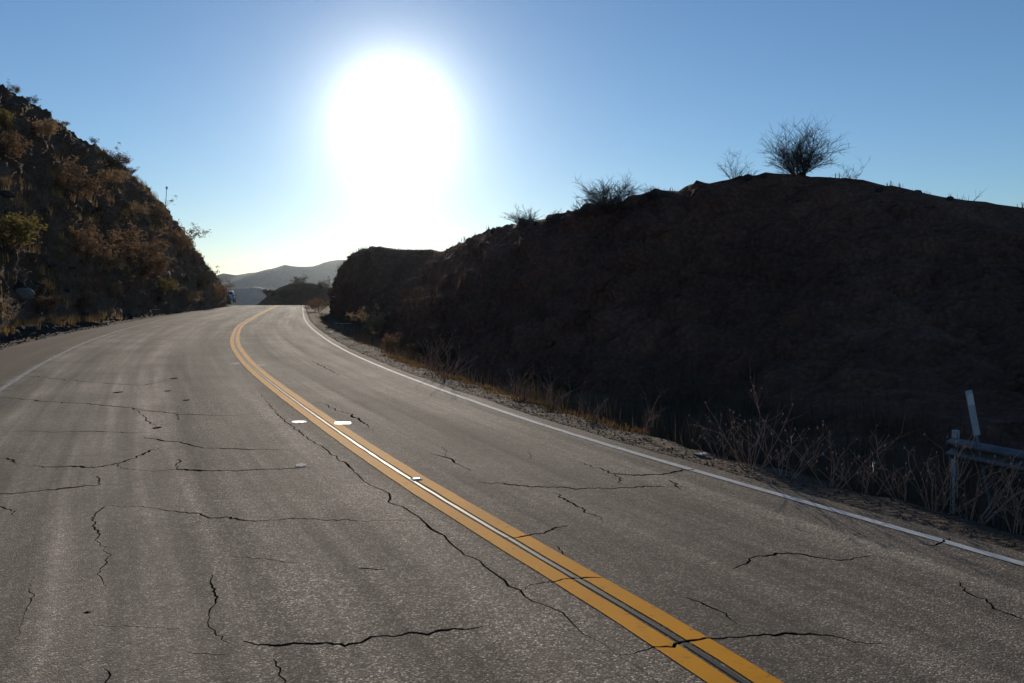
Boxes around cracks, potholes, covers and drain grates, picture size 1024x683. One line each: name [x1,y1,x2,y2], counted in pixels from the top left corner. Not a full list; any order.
crack [0,395,882,683]
crack [959,581,1023,619]
